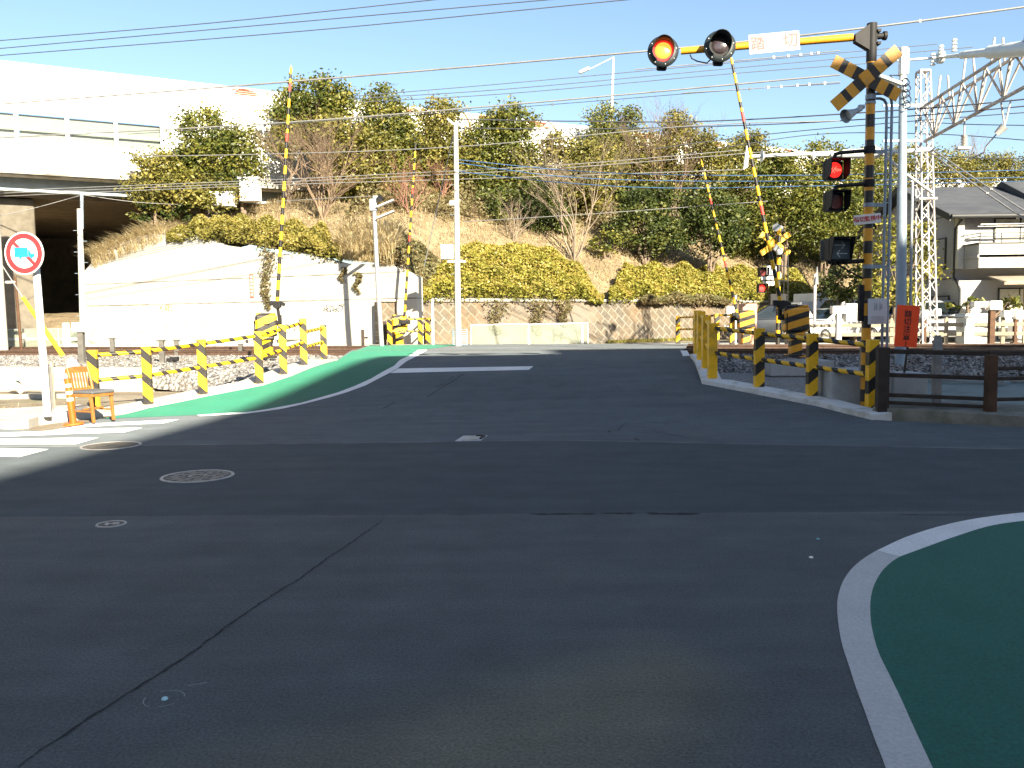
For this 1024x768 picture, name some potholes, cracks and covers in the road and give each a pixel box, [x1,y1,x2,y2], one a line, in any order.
crack [18,514,482,767]
manhole cover [160,469,235,483]
manhole cover [95,520,127,528]
manhole cover [79,441,142,450]
